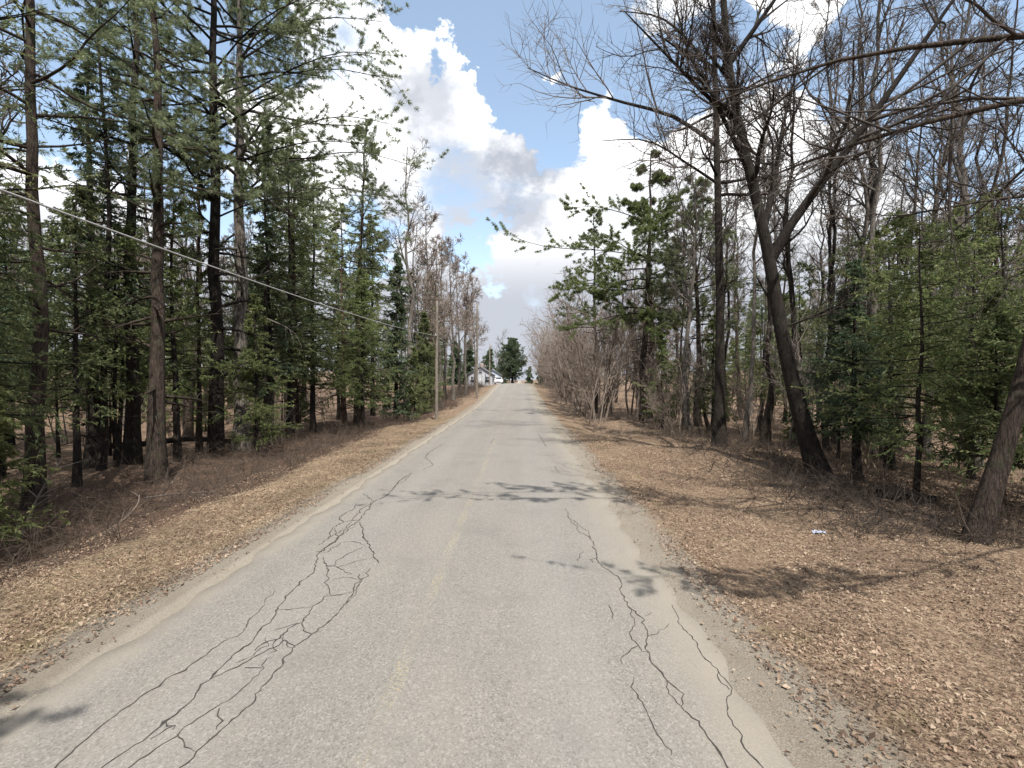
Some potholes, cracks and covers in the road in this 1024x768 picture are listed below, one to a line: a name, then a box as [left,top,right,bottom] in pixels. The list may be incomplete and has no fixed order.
crack [565,508,764,768]
